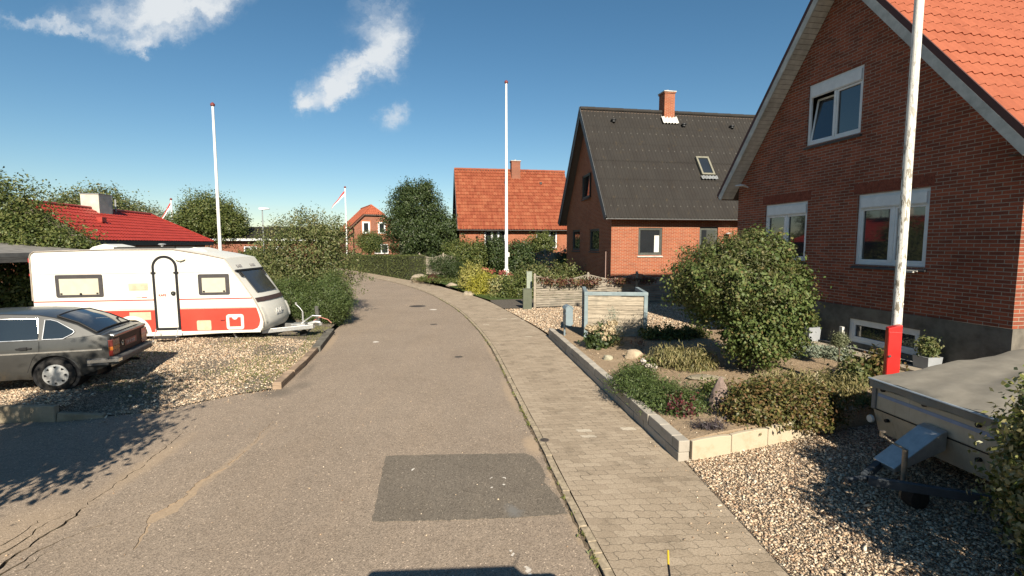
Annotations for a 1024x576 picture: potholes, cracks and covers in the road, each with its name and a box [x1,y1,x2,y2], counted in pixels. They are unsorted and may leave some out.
crack [0,434,181,576]
